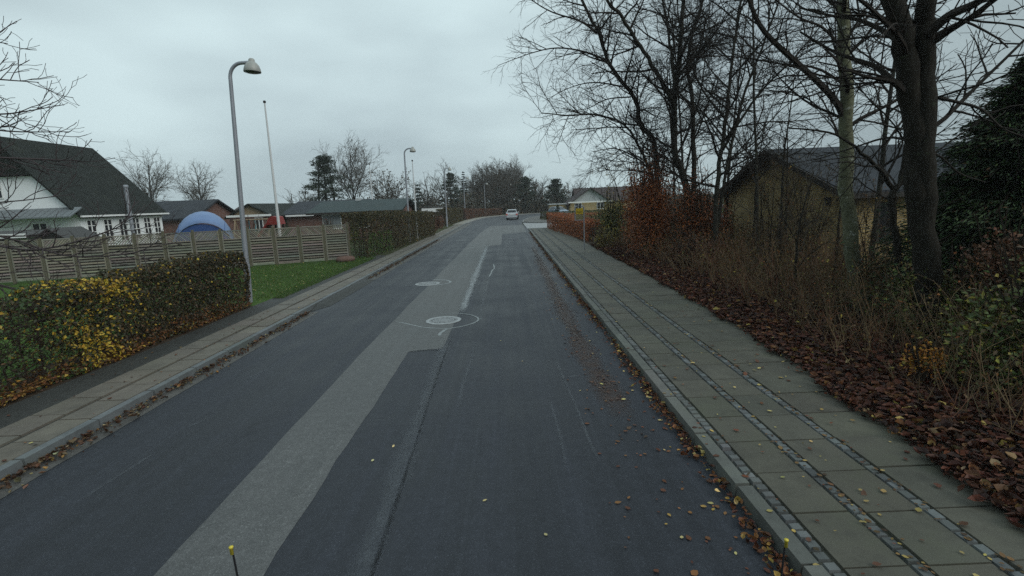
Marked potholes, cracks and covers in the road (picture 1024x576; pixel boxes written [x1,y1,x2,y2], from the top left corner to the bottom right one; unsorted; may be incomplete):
manhole cover [426,316,461,325]
